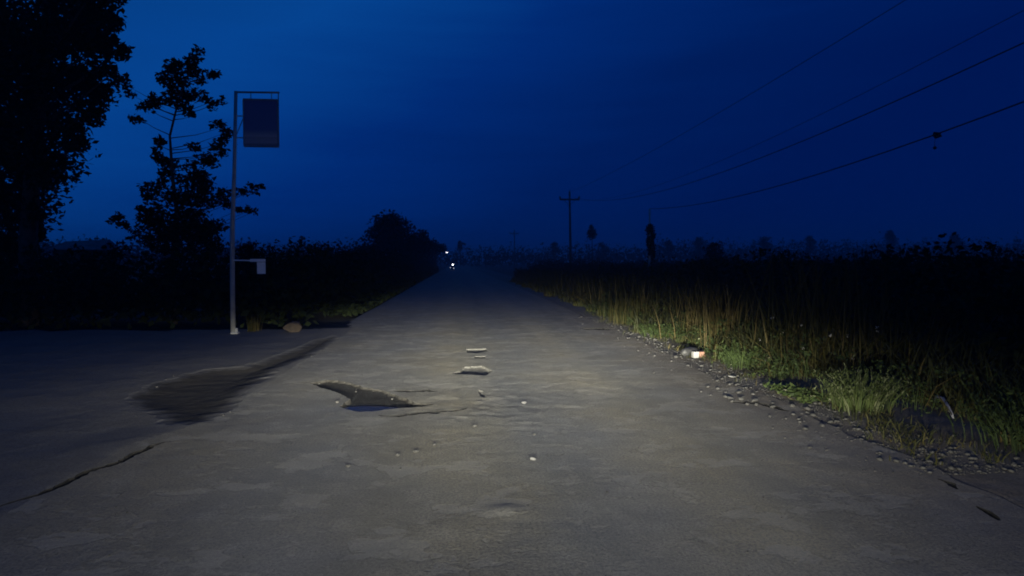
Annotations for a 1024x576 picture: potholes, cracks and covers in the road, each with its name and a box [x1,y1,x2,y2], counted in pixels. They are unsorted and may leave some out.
crack [939,479,958,489]
pothole [311,380,434,412]
crack [976,506,1001,521]
crack [0,441,169,507]
crack [378,389,467,417]
